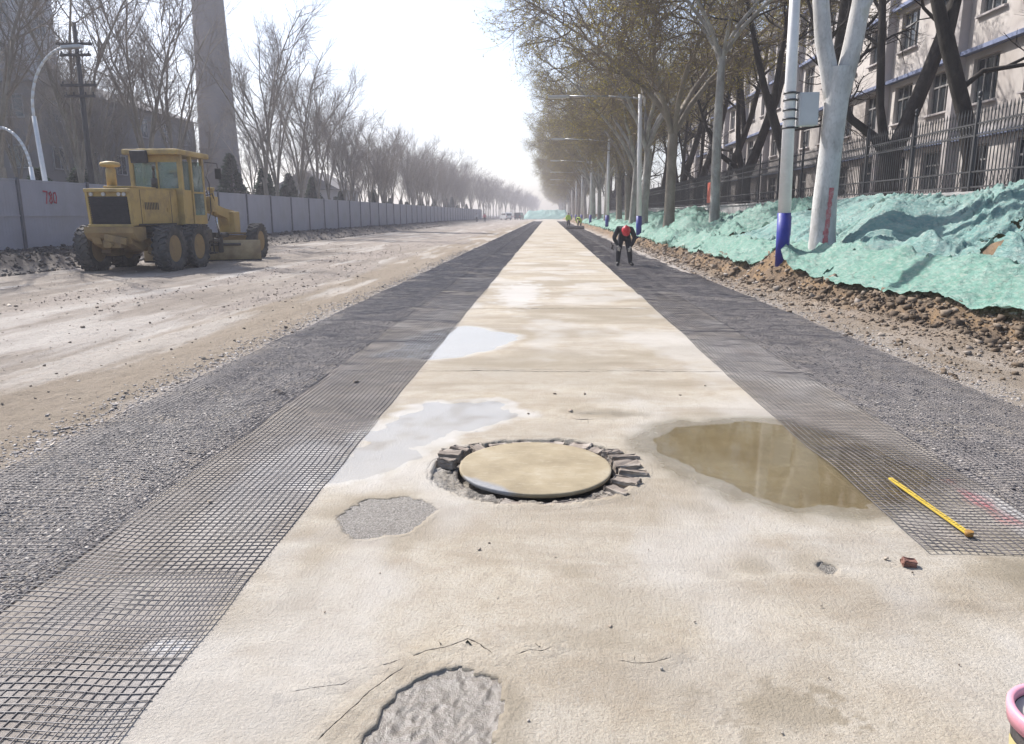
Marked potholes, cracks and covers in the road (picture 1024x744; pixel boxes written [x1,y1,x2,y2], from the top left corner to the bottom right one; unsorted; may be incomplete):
crack [596,645,696,672]
pothole [349,661,519,744]
crack [272,631,576,744]
manhole cover [416,436,653,510]
